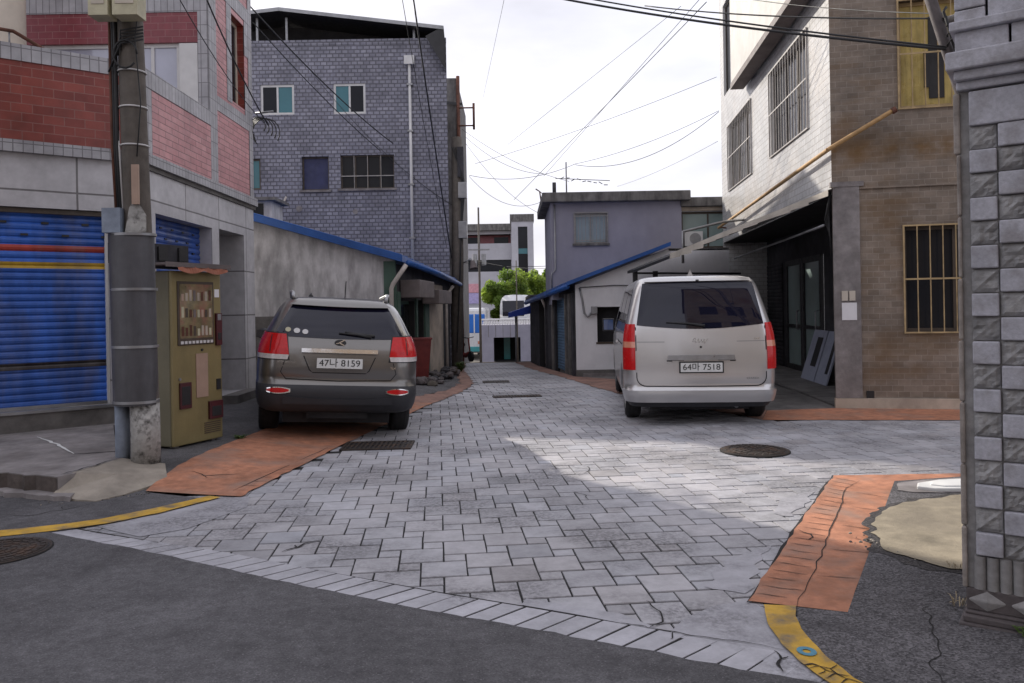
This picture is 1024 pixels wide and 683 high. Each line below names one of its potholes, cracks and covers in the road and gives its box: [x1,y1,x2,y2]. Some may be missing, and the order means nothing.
crack [39,437,117,474]
crack [922,605,942,682]
crack [621,600,785,650]
drain grate [339,440,415,452]
manhole cover [720,444,791,458]
manhole cover [0,537,54,565]
